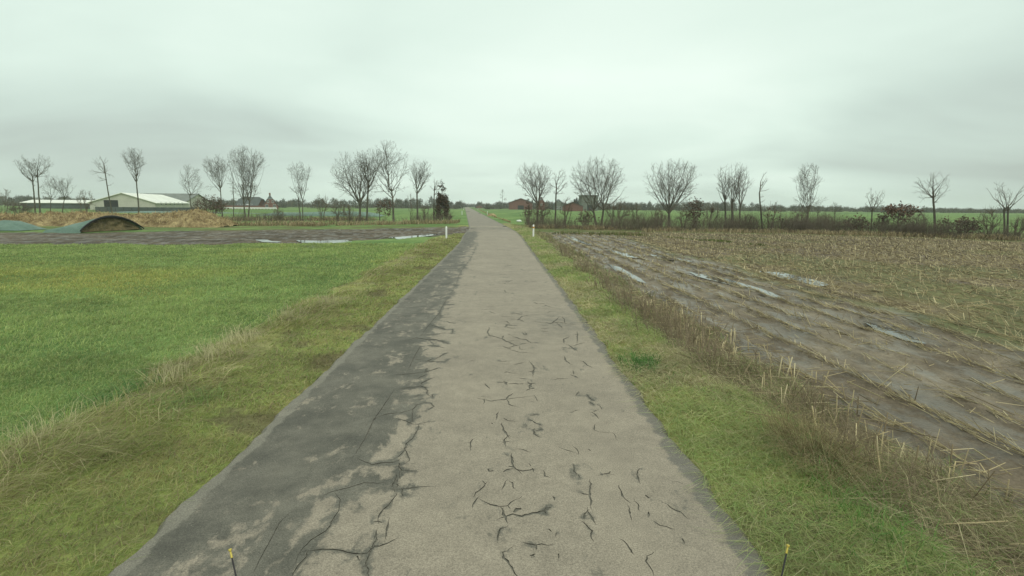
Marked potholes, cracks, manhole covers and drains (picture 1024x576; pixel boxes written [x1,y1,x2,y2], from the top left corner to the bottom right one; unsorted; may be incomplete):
crack [252,315,453,576]
crack [472,302,687,576]
